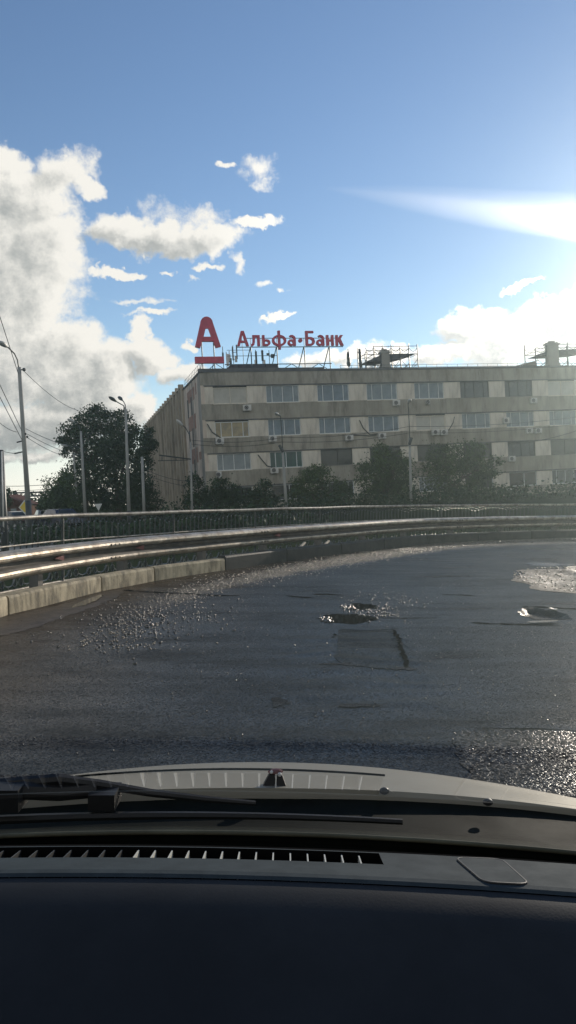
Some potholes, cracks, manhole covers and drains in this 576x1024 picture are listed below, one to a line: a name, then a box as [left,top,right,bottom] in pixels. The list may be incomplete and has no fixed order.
pothole [511,566,576,593]
pothole [518,607,572,620]
pothole [323,614,377,624]
crack [340,617,437,666]
